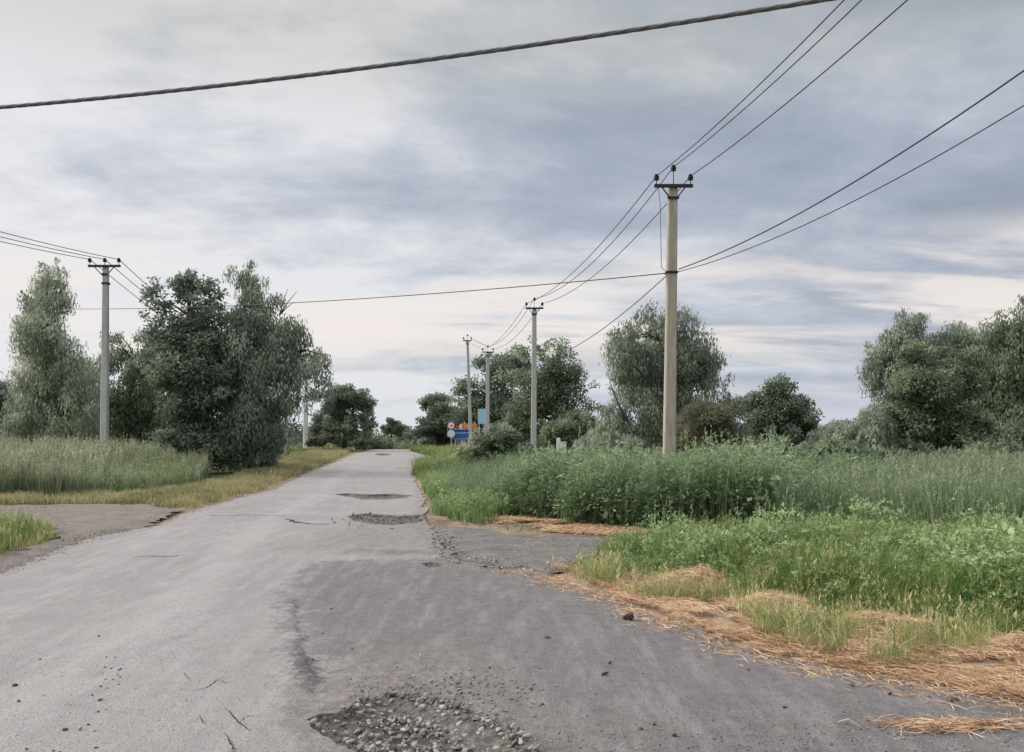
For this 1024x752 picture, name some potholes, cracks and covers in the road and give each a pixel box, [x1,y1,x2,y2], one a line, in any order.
pothole [306,694,535,752]
crack [225,709,260,752]
pothole [348,513,427,525]
